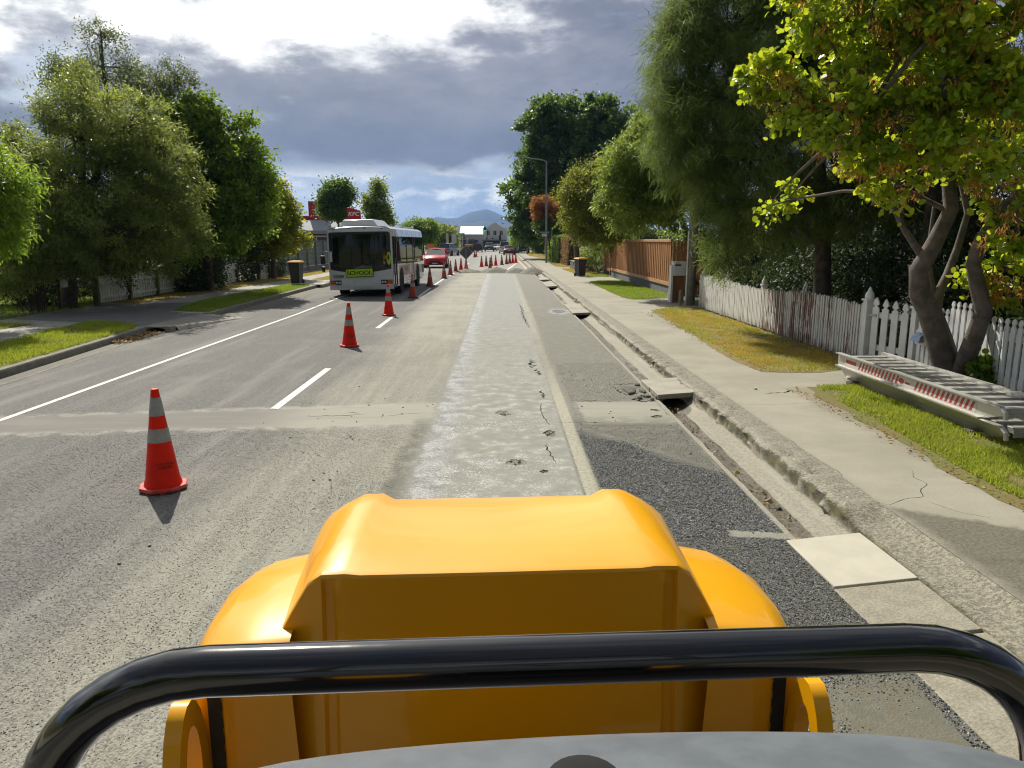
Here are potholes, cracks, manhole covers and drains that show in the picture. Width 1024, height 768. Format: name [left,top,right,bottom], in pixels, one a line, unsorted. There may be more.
crack [528,359,550,425]
